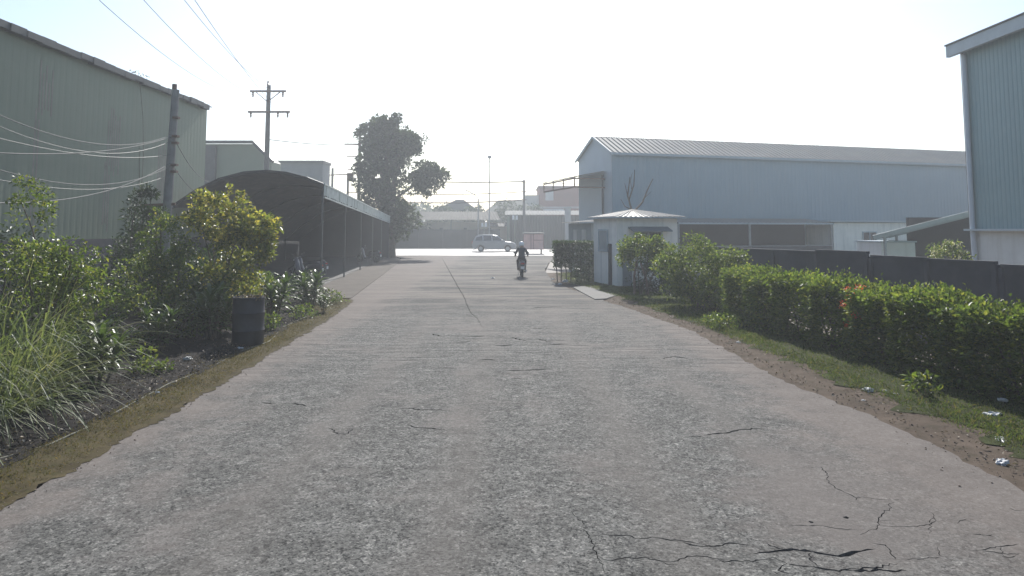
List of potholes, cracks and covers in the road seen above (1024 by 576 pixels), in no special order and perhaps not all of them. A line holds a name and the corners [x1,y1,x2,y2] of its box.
crack [482,328,564,360]
crack [691,428,755,437]
crack [958,519,1016,558]
crack [589,467,941,574]
